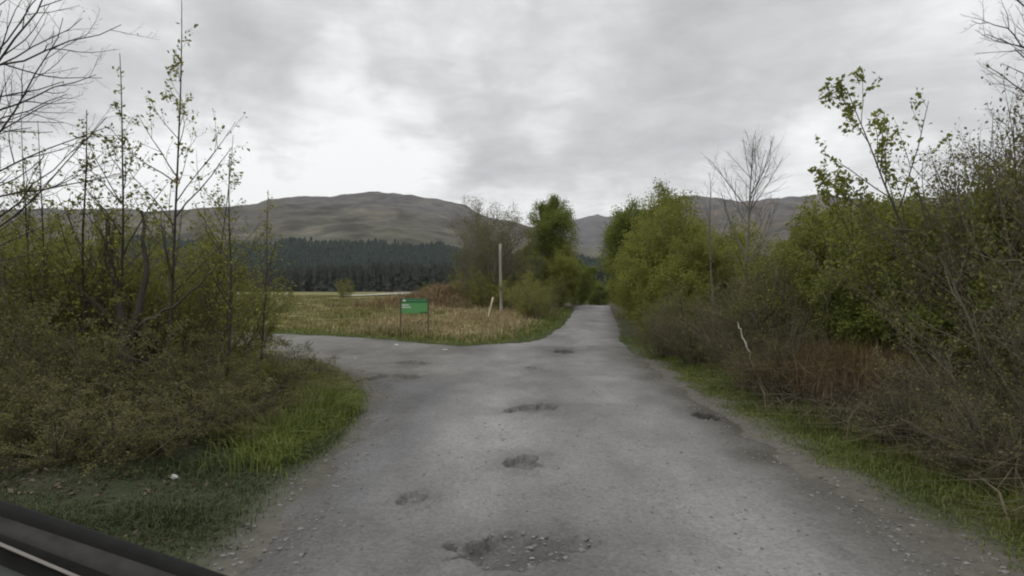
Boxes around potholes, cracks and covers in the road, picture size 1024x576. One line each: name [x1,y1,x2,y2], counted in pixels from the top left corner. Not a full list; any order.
pothole [682,409,729,423]
pothole [494,450,558,476]
pothole [384,487,442,513]
pothole [493,401,570,414]
pothole [412,525,639,576]
pothole [363,372,439,384]
pothole [382,359,443,368]
pothole [544,348,585,356]
